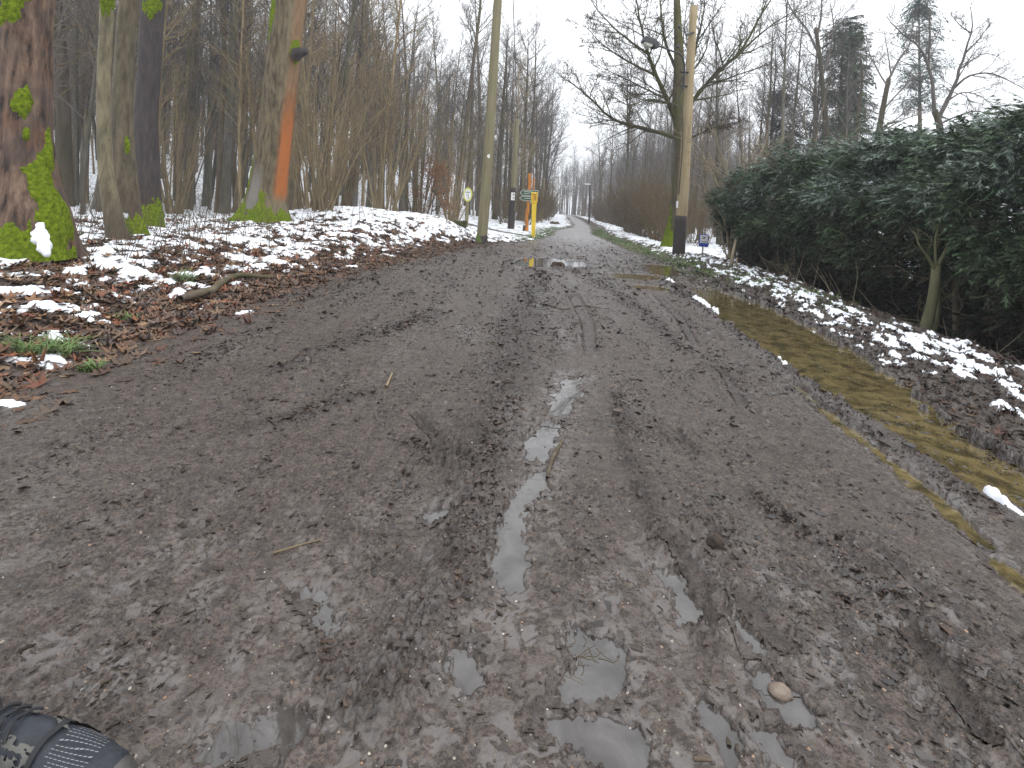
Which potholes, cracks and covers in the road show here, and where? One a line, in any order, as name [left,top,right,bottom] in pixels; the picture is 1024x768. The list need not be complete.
pothole [539,372,587,428]
pothole [485,479,553,595]
pothole [522,662,650,768]
pothole [521,413,573,480]
